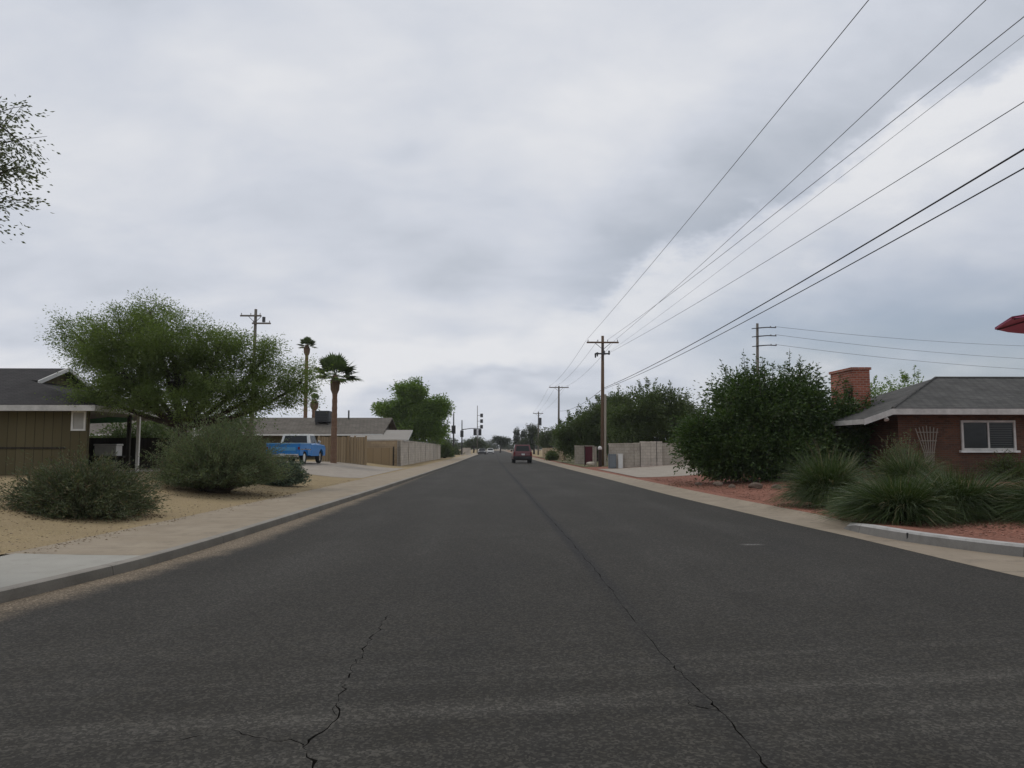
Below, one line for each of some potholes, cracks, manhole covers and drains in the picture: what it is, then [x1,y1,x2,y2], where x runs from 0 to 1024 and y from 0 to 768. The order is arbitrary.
crack [228,617,387,768]
crack [534,501,768,768]
